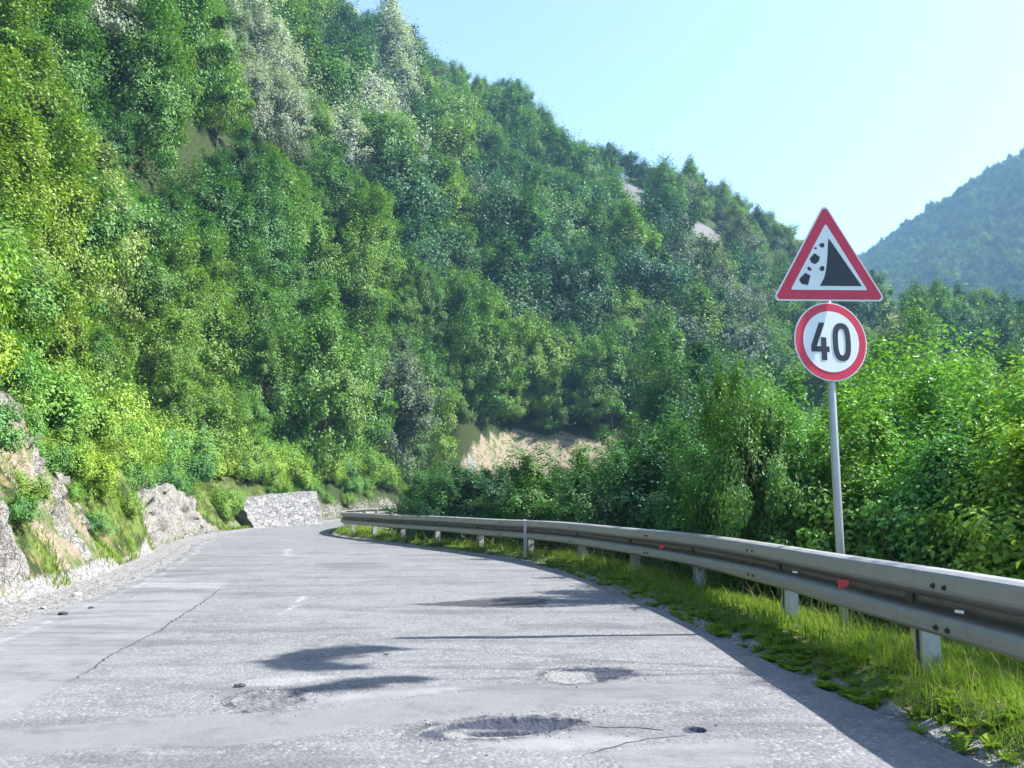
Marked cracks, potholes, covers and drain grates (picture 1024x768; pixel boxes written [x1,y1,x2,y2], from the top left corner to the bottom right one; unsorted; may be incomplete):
crack [583,726,678,755]
pothole [230,690,305,712]
crack [70,587,222,682]
pothole [681,725,707,733]
pothole [541,667,634,684]
pothole [415,716,582,739]
